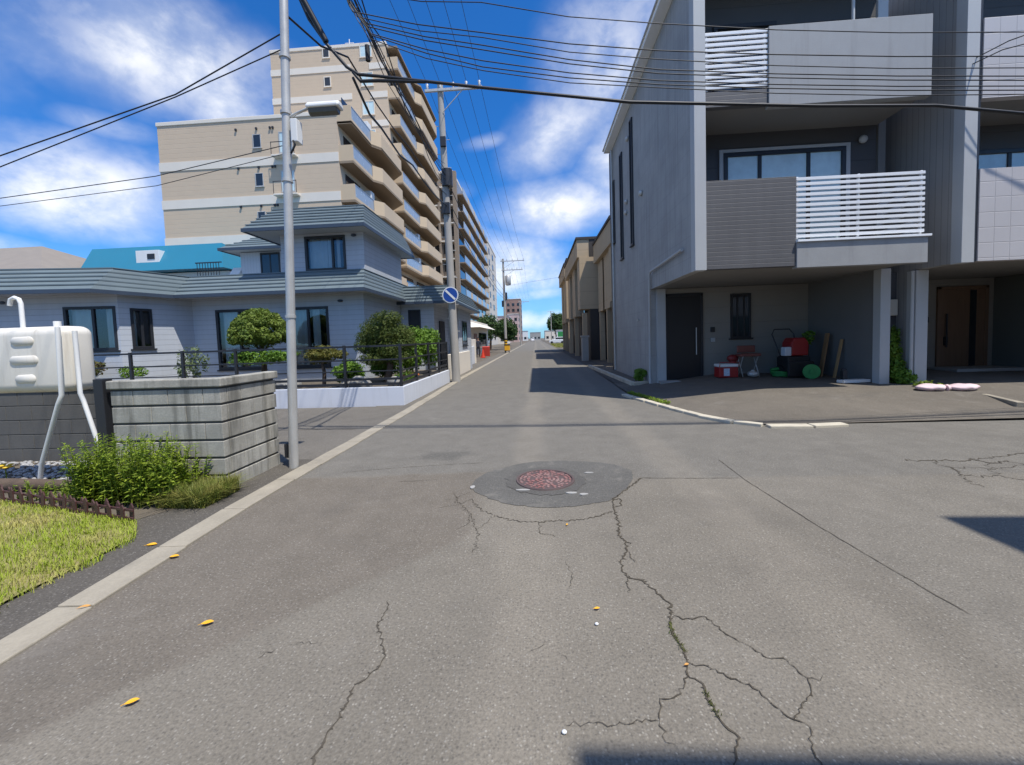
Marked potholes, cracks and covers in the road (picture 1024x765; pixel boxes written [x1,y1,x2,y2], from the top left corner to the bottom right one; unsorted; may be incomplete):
crack [905,453,1024,487]
crack [399,478,823,765]
manhole cover [516,469,575,491]
crack [310,600,389,765]
